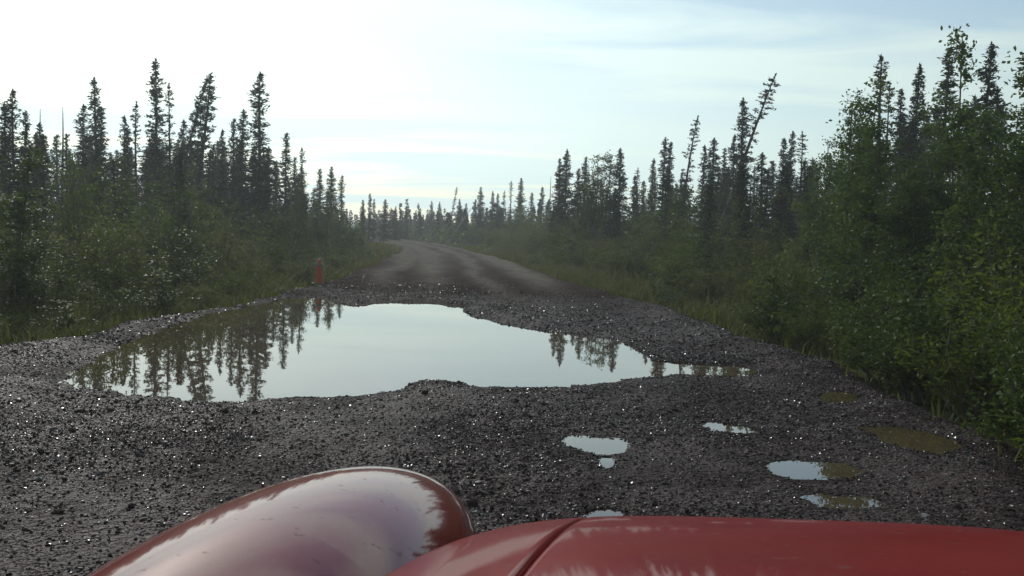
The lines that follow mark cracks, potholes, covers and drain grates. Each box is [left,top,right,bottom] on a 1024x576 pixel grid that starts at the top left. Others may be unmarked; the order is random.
pothole [807,390,867,404]
pothole [45,292,776,405]
pothole [550,434,642,459]
pothole [751,457,876,483]
pothole [847,423,979,456]
pothole [788,488,898,514]
pothole [584,455,630,473]
pothole [688,420,765,436]
